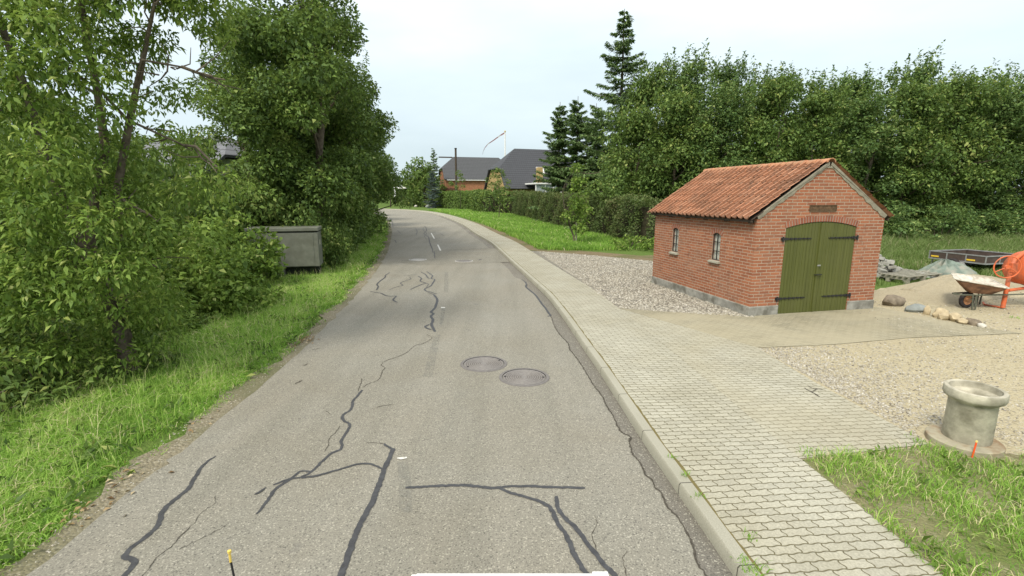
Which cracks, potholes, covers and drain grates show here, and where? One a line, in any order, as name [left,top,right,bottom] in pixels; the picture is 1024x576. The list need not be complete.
crack [550,316,707,576]
manhole cover [499,368,550,387]
manhole cover [460,356,507,372]
crack [142,495,227,576]
